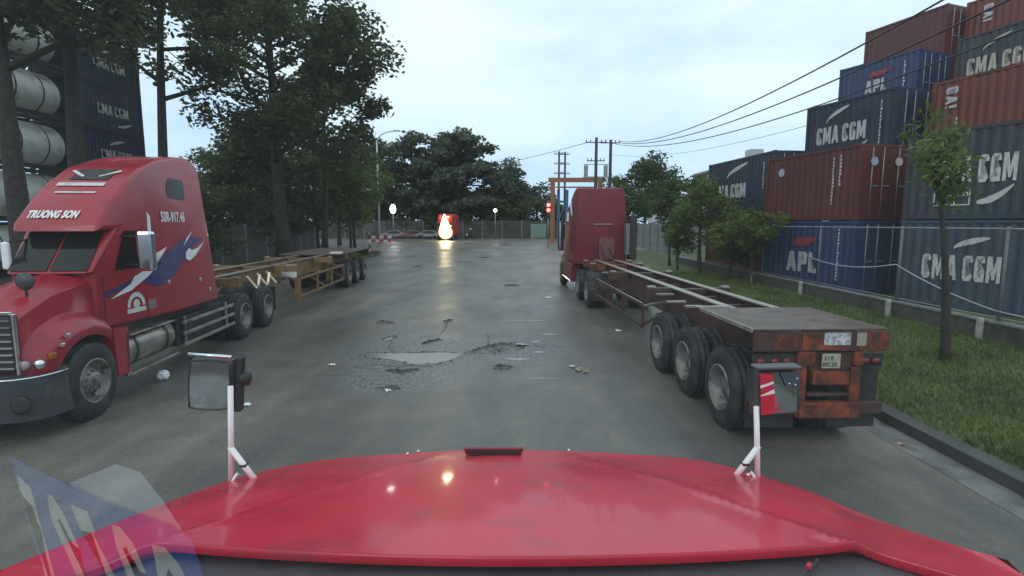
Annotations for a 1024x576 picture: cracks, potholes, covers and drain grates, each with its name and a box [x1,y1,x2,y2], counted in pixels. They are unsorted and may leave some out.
pothole [358,350,469,365]
pothole [467,341,531,355]
